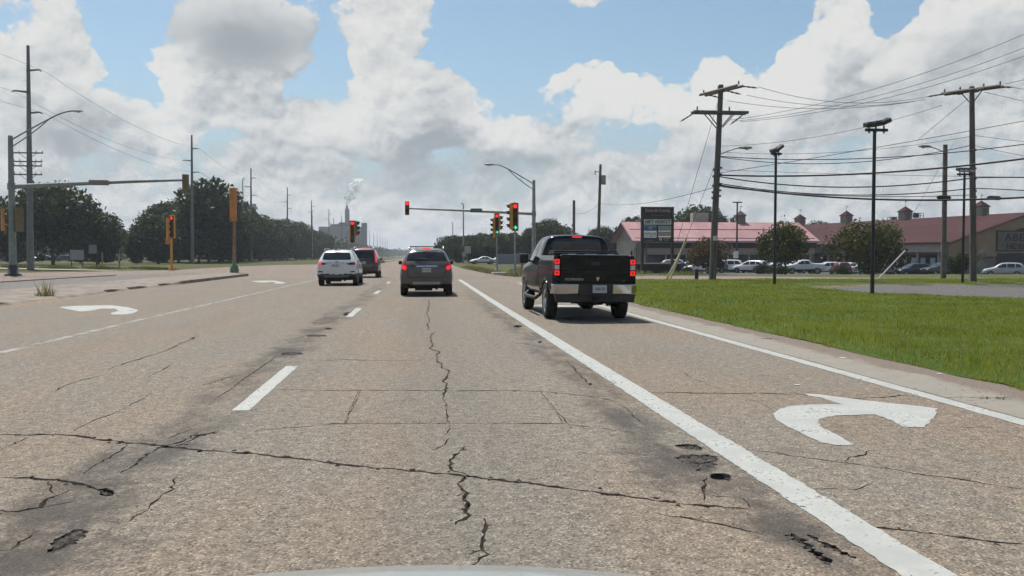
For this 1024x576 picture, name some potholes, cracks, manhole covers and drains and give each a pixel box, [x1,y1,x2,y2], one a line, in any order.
pothole [47,529,89,553]
crack [256,301,643,565]
pothole [674,454,719,471]
crack [56,336,198,391]
crack [111,477,177,523]
crack [0,475,103,514]
pothole [710,473,731,481]
